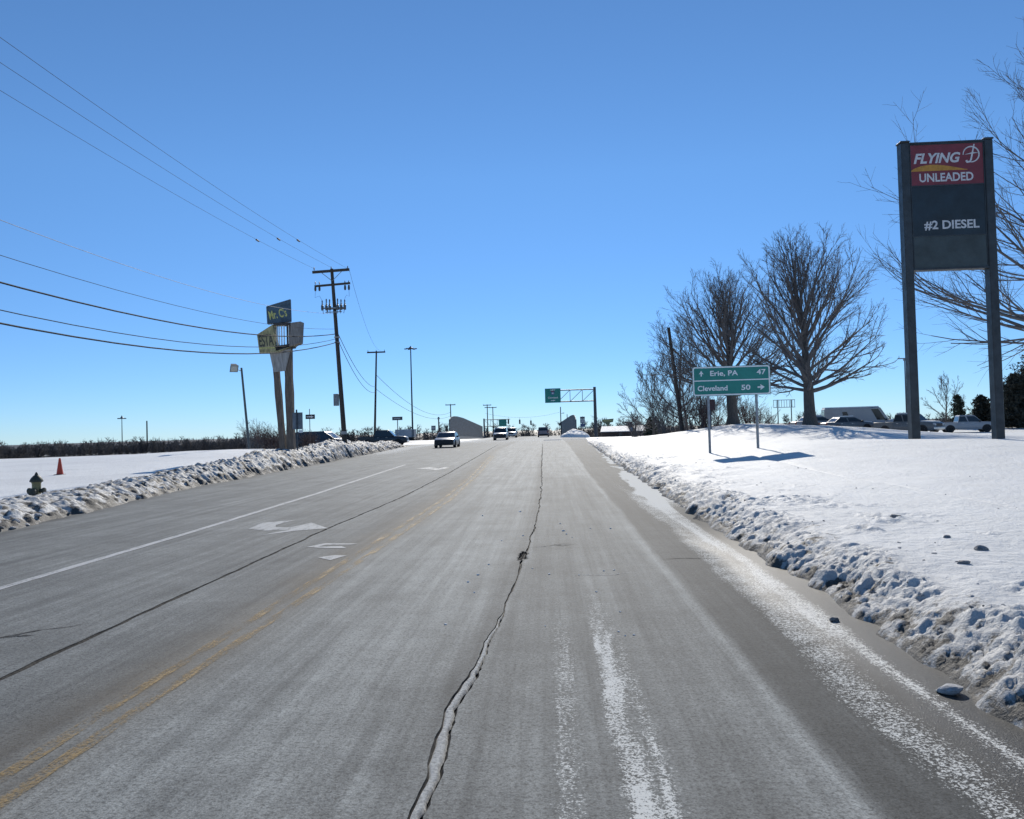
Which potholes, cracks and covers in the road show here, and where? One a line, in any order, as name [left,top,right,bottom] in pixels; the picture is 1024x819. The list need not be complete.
crack [407,445,572,819]
crack [0,448,492,681]
